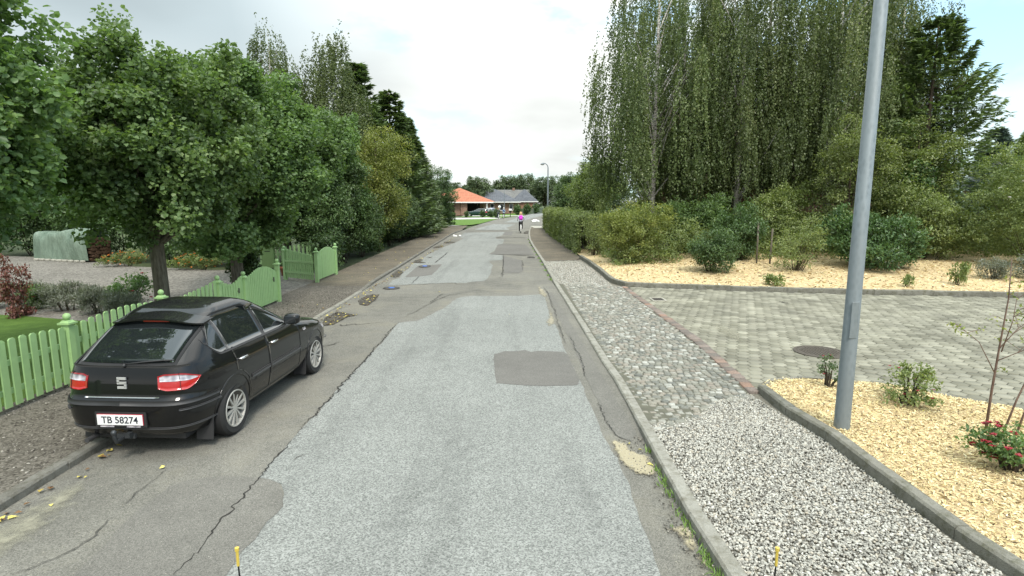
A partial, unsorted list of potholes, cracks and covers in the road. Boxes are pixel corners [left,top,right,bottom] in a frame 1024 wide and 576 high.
manhole cover [793,345,840,359]
crack [11,470,165,574]
crack [174,441,302,573]
crack [546,290,585,376]
